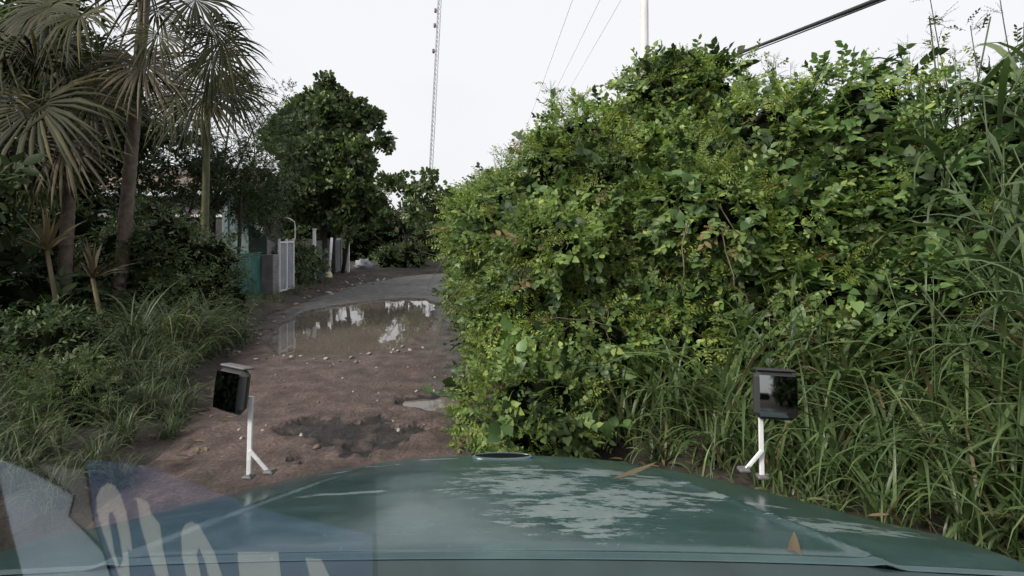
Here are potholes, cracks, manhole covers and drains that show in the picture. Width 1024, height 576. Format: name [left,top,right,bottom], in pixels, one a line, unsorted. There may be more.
pothole [263,298,439,357]
pothole [273,413,432,464]
